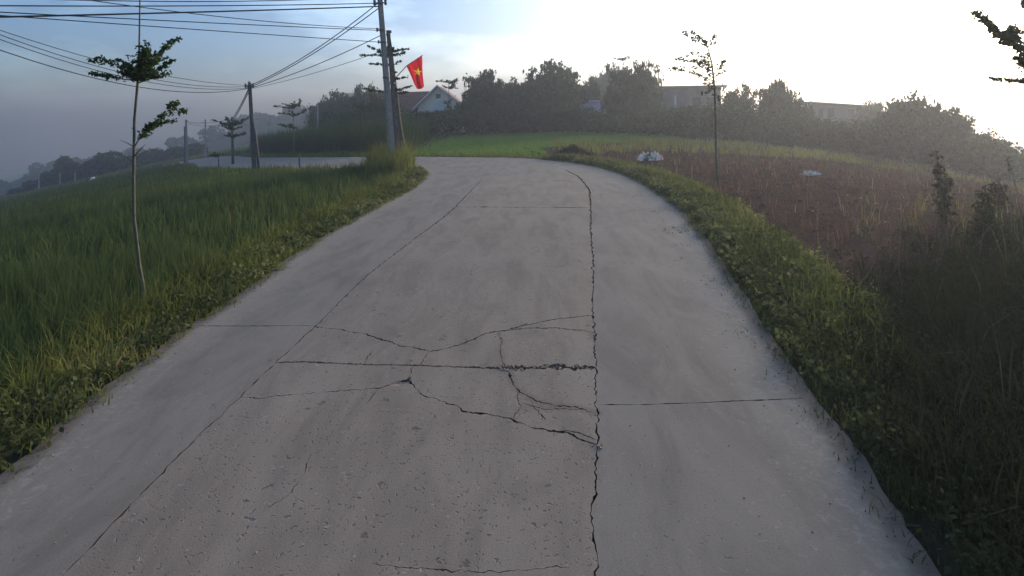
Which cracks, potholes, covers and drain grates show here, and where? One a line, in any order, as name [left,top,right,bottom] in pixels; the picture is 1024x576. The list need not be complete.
crack [66,170,799,576]
